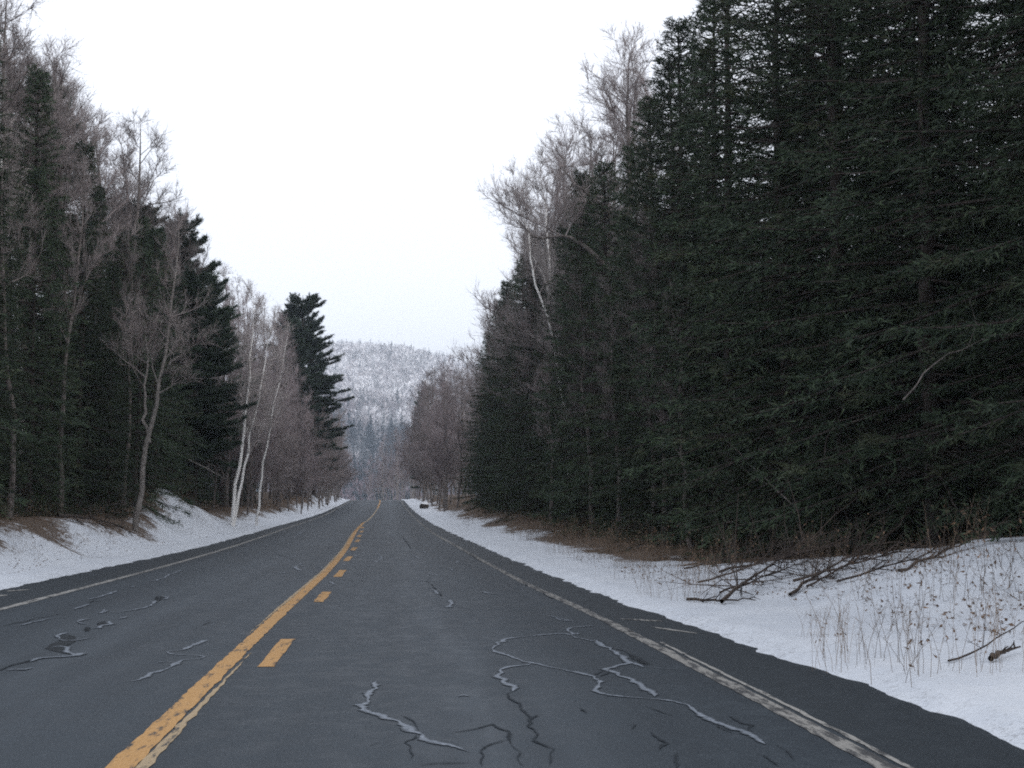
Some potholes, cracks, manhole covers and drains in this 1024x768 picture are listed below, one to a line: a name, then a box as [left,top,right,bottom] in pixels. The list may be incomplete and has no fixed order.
crack [320,524,458,607]
